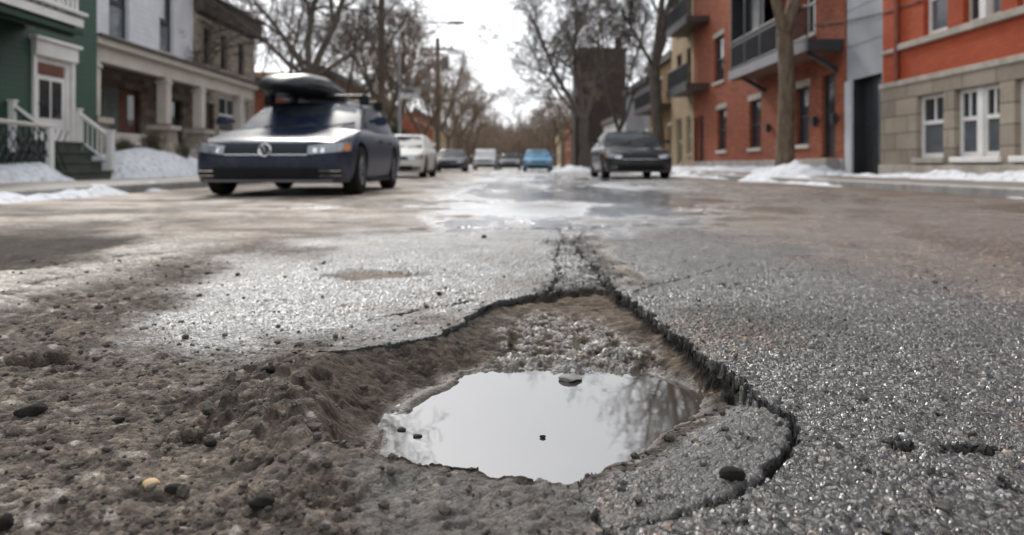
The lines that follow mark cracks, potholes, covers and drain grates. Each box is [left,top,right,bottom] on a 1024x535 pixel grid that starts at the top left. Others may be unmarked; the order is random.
crack [294,223,801,529]
pothole [292,286,732,486]
